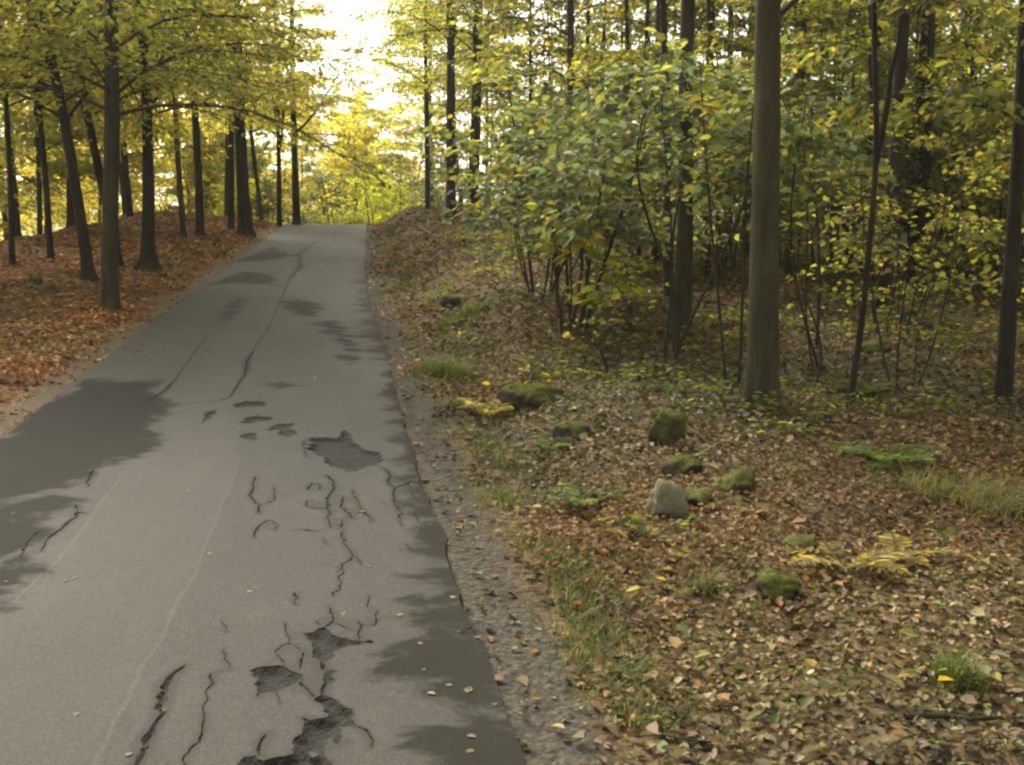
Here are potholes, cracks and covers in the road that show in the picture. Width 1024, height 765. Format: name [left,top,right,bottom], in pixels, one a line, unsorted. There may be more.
pothole [303,627,374,666]
pothole [237,695,356,765]
pothole [304,430,385,472]
pothole [266,423,298,437]
crack [150,242,316,405]
crack [86,470,95,487]
crack [256,468,419,758]
crack [134,650,230,765]
crack [20,504,86,561]
pothole [249,665,304,694]
crack [248,476,279,539]
pothole [240,415,274,424]
